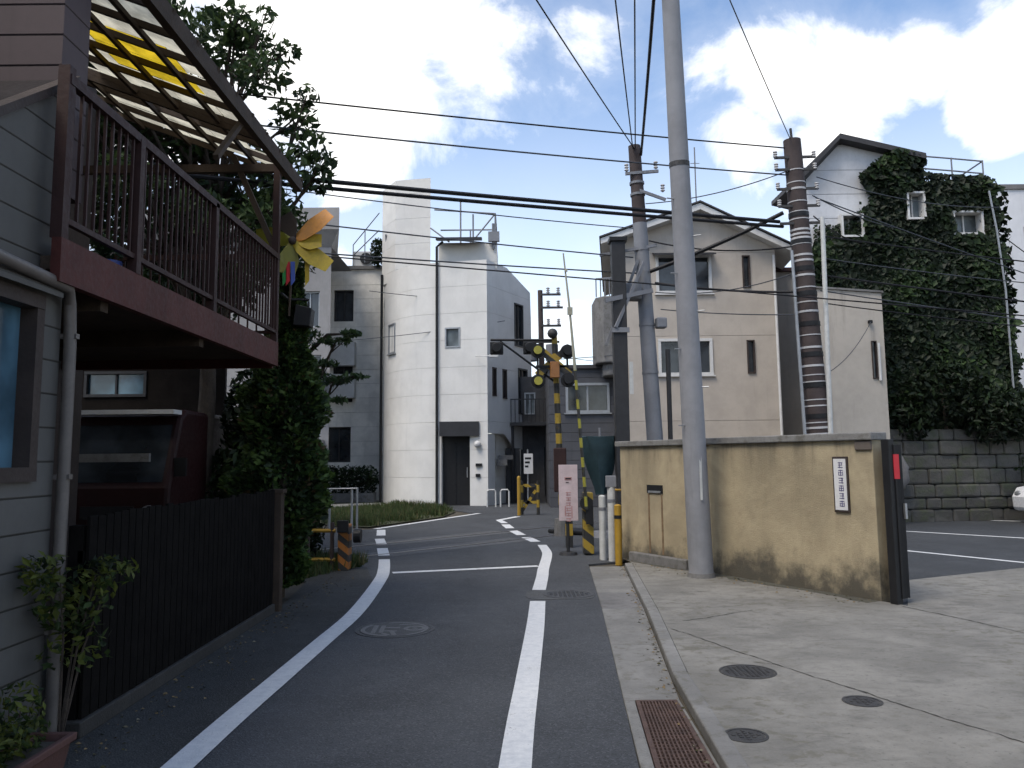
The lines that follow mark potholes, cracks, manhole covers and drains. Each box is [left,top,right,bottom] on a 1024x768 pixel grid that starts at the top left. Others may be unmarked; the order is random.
manhole cover [526,590,595,600]
manhole cover [725,728,769,743]
manhole cover [355,621,435,638]
manhole cover [842,695,884,707]
drain grate [635,699,717,768]
manhole cover [719,664,777,679]
